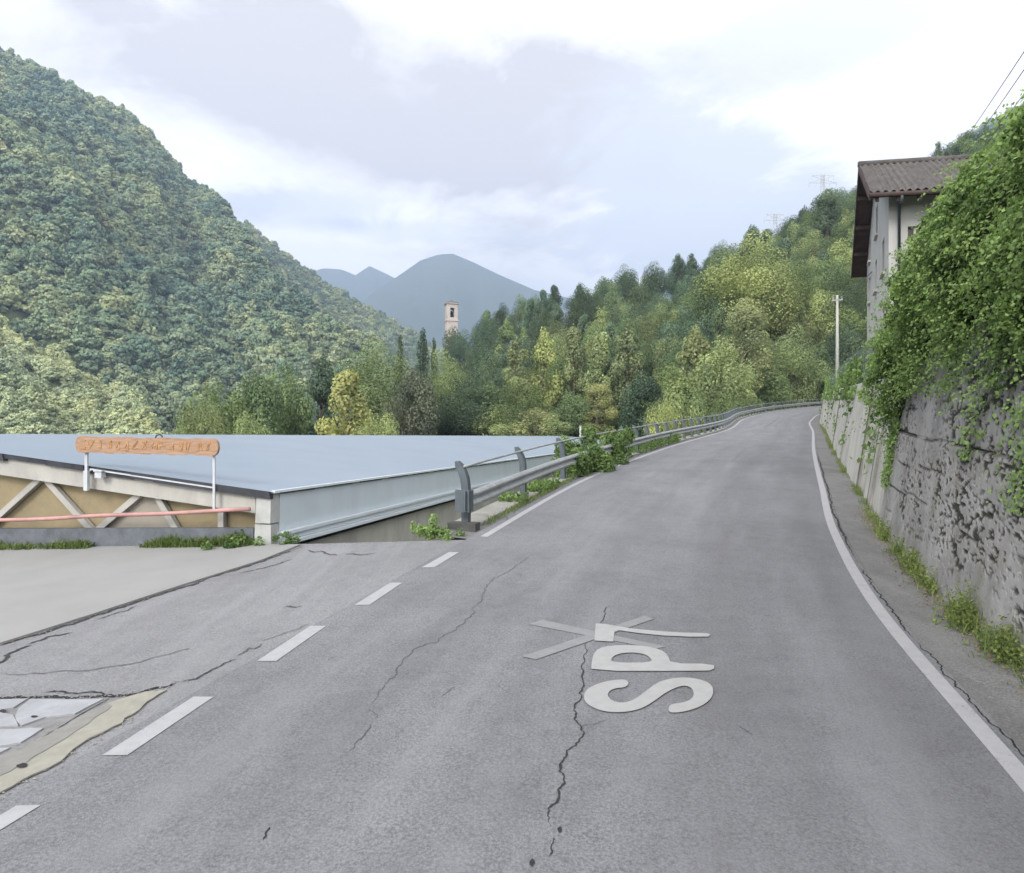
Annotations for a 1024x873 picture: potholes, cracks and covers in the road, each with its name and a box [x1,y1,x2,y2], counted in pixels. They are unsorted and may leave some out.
crack [0,624,308,699]
crack [349,560,525,751]
crack [547,643,606,856]
